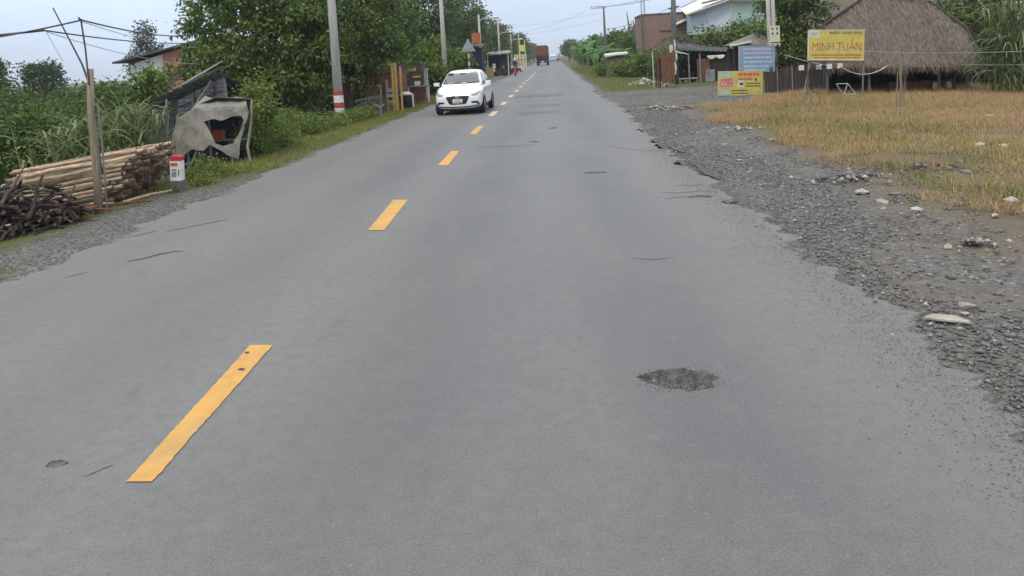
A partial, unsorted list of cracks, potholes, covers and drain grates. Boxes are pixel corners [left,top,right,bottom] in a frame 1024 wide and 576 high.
crack [667,143,719,198]
pothole [45,459,70,468]
pothole [626,360,733,398]
